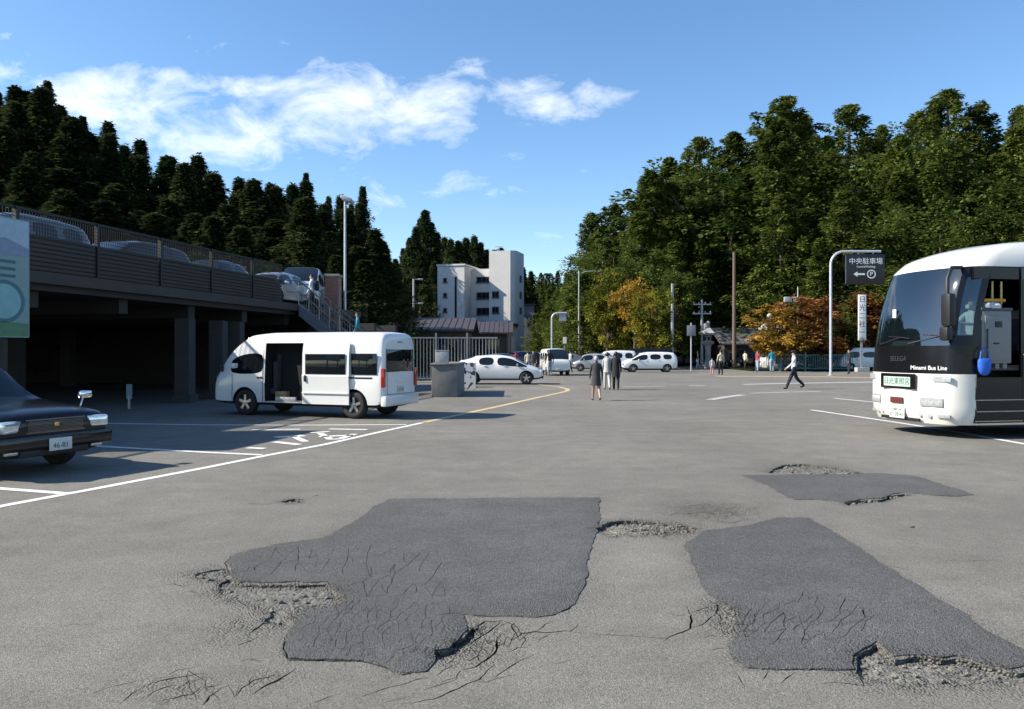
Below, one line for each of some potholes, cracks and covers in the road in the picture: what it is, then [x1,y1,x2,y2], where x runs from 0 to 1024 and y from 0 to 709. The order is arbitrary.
pothole [219,579,343,625]
pothole [844,494,909,506]
pothole [598,521,697,537]
crack [92,549,445,705]
pothole [855,644,1024,687]
pothole [195,569,227,581]
crack [664,606,723,651]
pothole [769,464,865,474]
